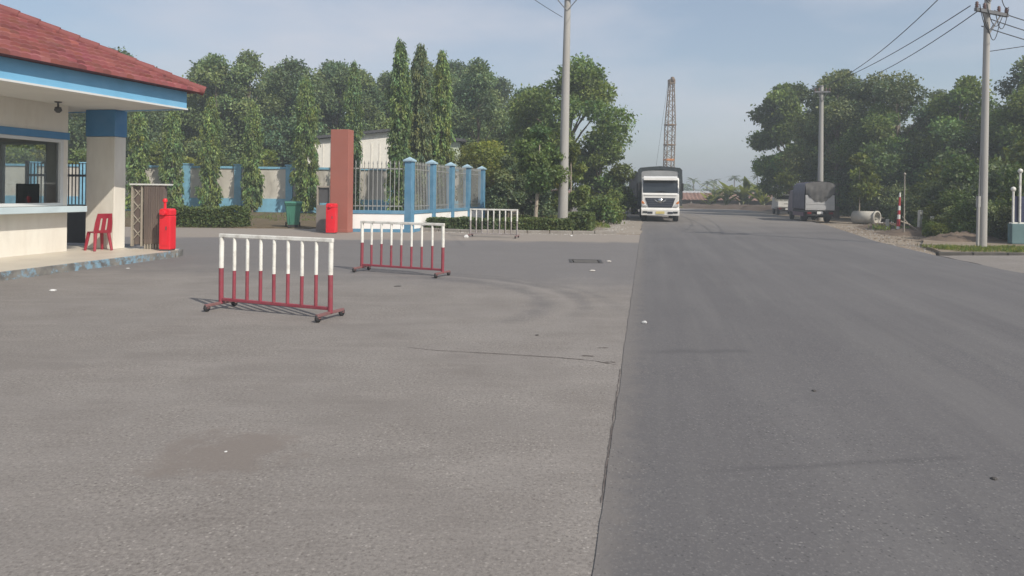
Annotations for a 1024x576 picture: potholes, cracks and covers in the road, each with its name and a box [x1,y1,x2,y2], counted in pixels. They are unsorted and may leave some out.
crack [411,347,621,502]
